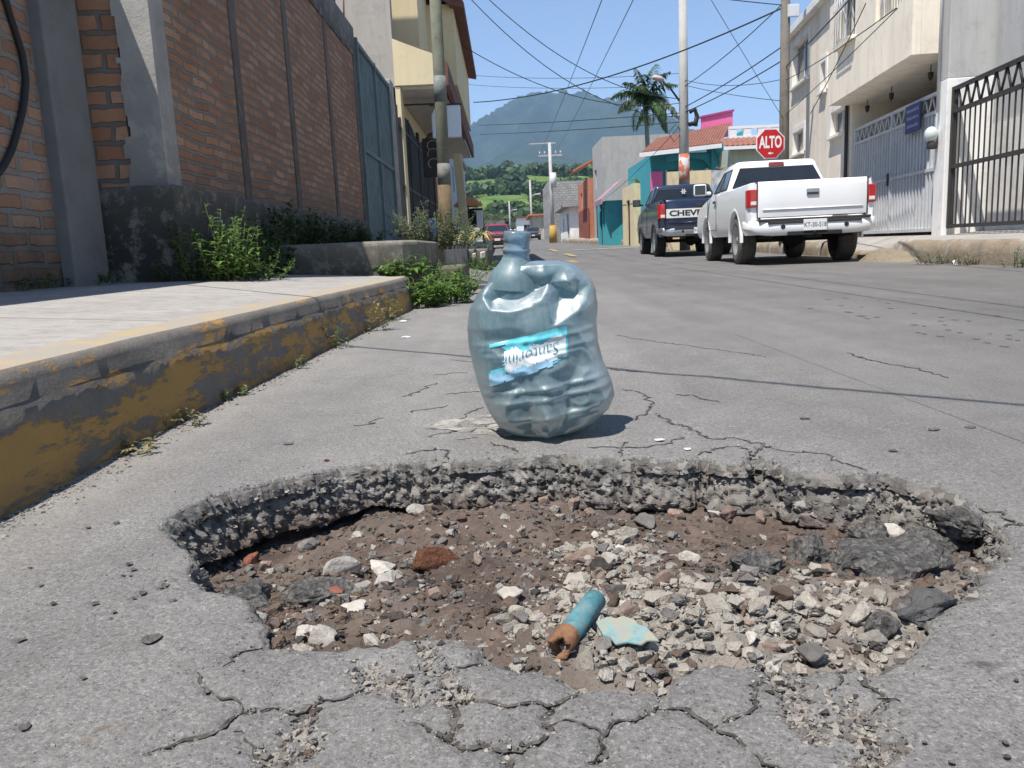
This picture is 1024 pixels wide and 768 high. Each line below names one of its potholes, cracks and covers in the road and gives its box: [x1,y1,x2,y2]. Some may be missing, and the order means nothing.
pothole [159,455,1015,697]
crack [152,644,890,768]
crack [402,360,518,459]
crack [588,389,867,470]
